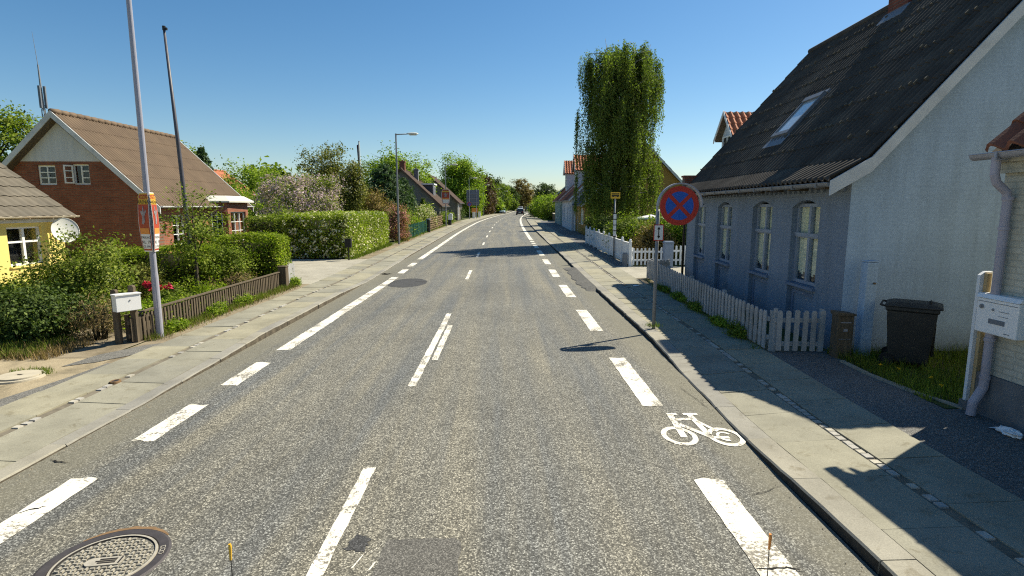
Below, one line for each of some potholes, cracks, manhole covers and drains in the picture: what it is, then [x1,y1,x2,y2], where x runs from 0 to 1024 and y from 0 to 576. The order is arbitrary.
manhole cover [0,370,48,385]
manhole cover [32,526,172,576]
